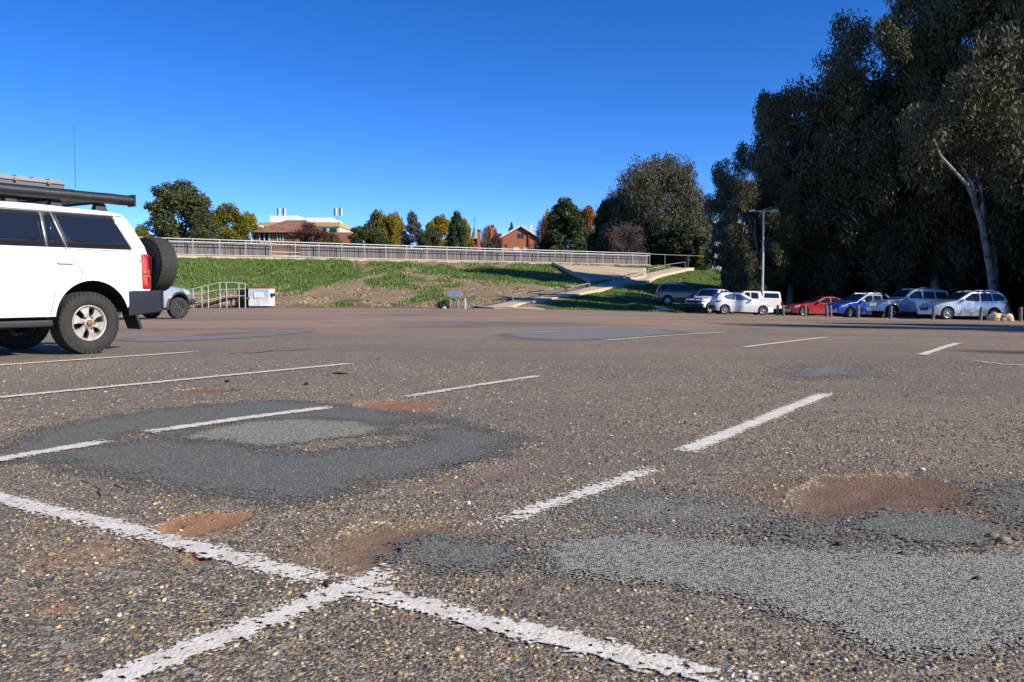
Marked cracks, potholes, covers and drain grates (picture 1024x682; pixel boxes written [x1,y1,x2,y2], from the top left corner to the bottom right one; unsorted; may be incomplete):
crack [81,474,139,503]
pothole [318,520,461,571]
pothole [353,399,447,411]
pothole [782,471,1001,525]
pothole [154,509,258,538]
